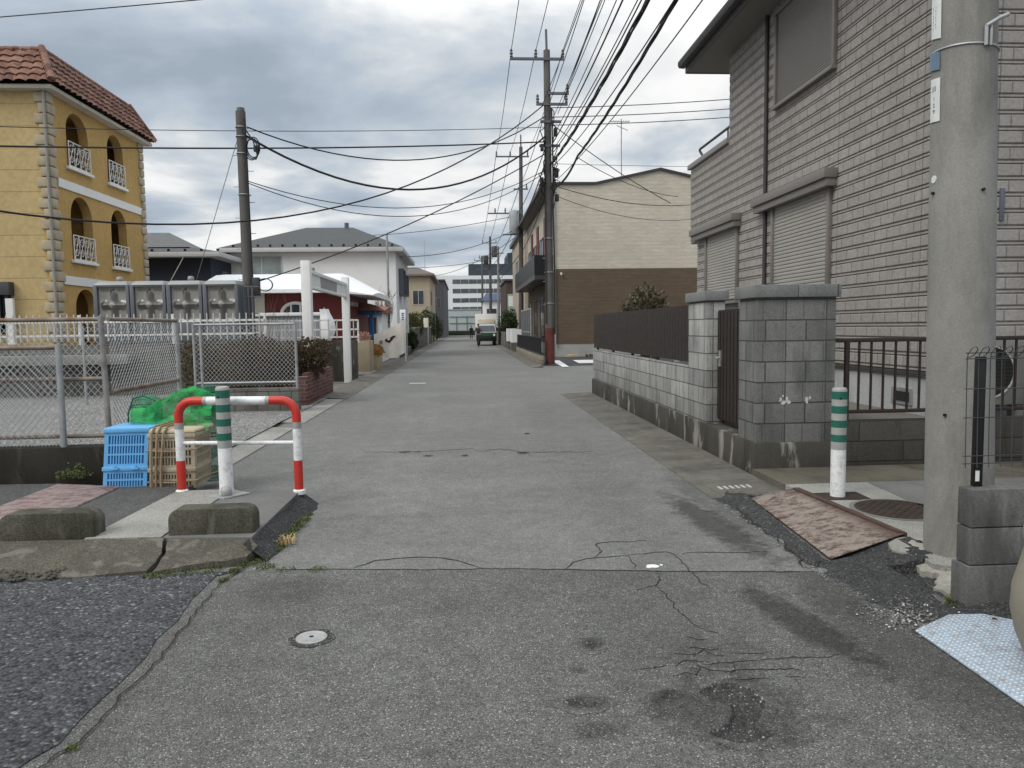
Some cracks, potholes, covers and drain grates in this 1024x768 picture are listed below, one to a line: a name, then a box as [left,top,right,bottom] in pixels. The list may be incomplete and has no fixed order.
crack [355,557,484,569]
pothole [688,677,790,751]
pothole [550,692,617,715]
manhole cover [849,499,924,521]
crack [636,573,839,680]
manhole cover [288,629,336,648]
pothole [647,685,691,709]
